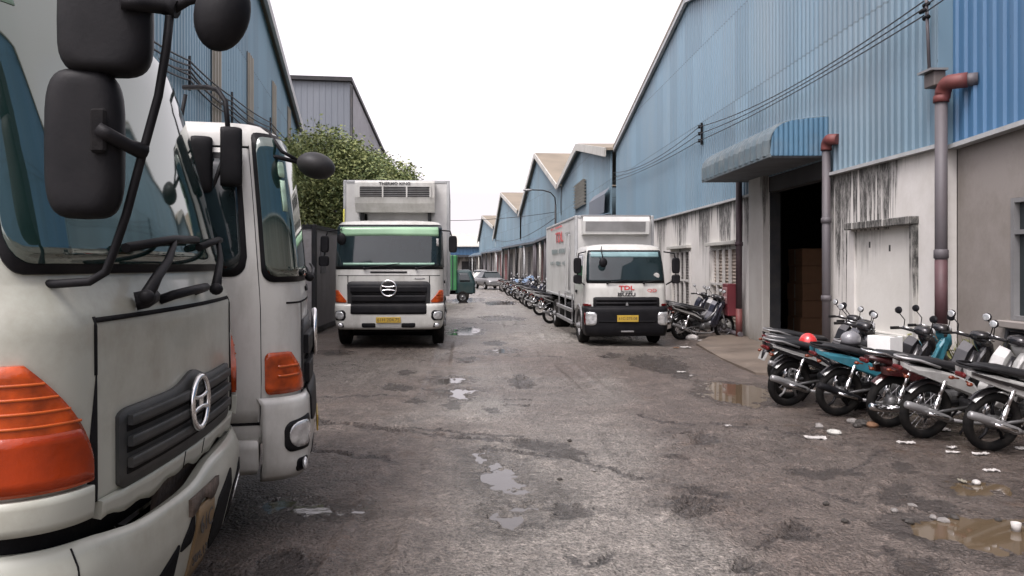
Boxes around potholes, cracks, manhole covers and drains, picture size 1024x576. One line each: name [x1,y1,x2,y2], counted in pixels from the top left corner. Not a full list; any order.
pothole [508,374,537,389]
pothole [664,493,721,519]
